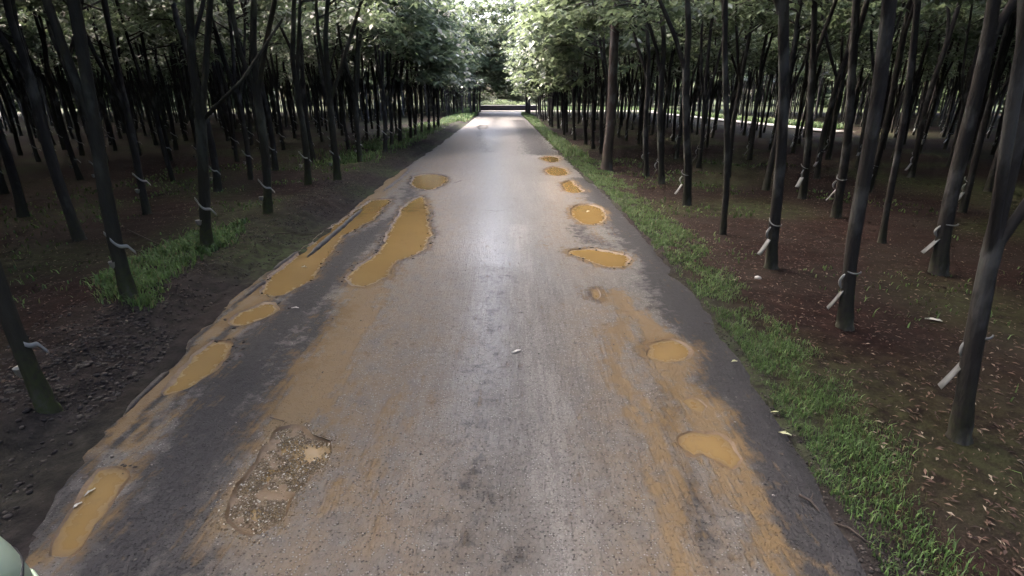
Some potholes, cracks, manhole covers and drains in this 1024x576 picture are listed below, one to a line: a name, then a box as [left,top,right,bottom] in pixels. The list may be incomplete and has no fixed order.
pothole [224,424,332,536]
pothole [259,199,392,296]
pothole [49,466,130,557]
pothole [228,302,280,326]
pothole [344,195,434,287]
pothole [561,180,585,193]
pothole [645,338,694,363]
pothole [677,430,743,471]
pothole [545,166,569,176]
pothole [410,174,448,190]
pothole [567,248,631,267]
pothole [570,204,607,225]
